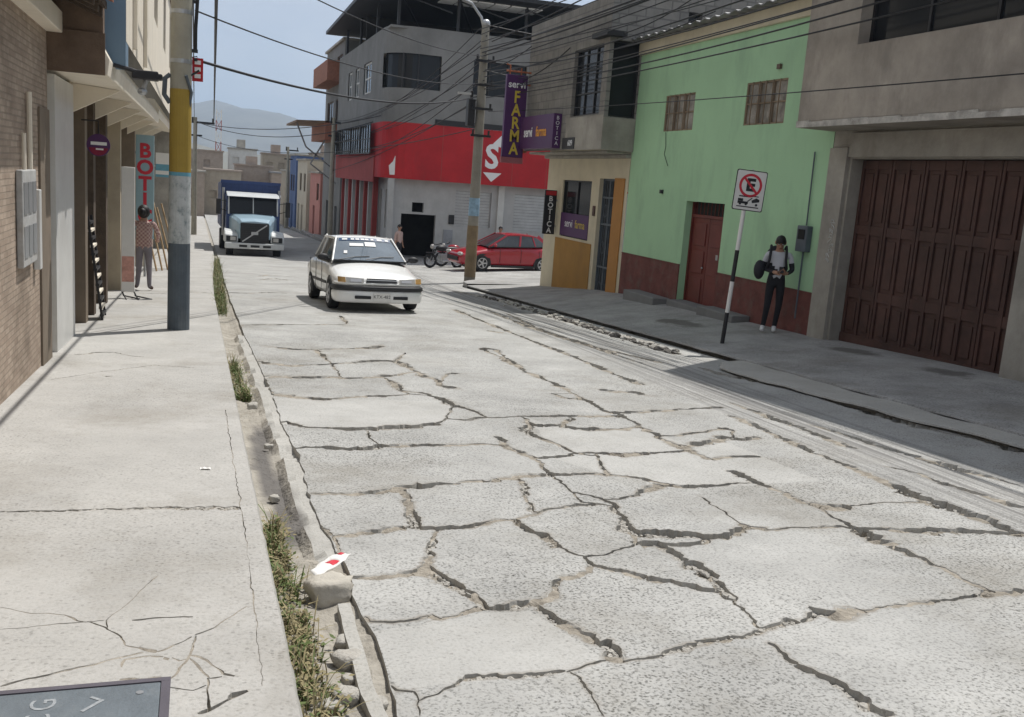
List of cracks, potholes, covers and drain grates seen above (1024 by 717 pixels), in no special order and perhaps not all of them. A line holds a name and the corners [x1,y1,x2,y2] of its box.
crack [0,410,263,714]
crack [52,352,194,380]
manhole cover [0,676,171,717]
crack [258,291,1024,717]
